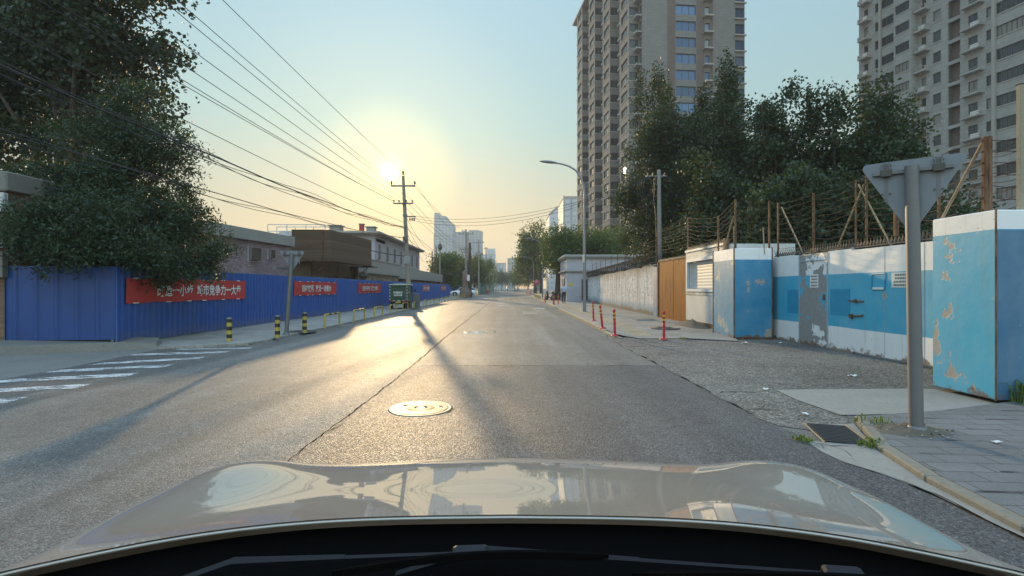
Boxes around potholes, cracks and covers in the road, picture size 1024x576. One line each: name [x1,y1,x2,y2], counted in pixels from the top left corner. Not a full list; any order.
manhole cover [388,401,453,417]
drain grate [803,422,872,445]
